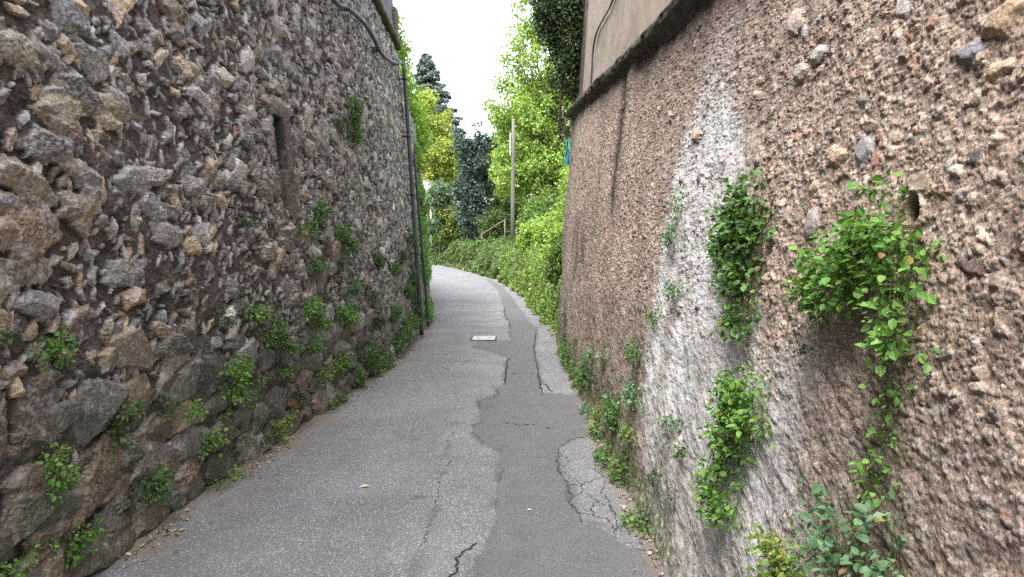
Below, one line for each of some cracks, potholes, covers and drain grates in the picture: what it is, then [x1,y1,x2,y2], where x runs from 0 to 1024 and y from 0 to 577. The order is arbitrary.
crack [418,423,458,551]
crack [448,543,477,577]
crack [556,437,631,535]
